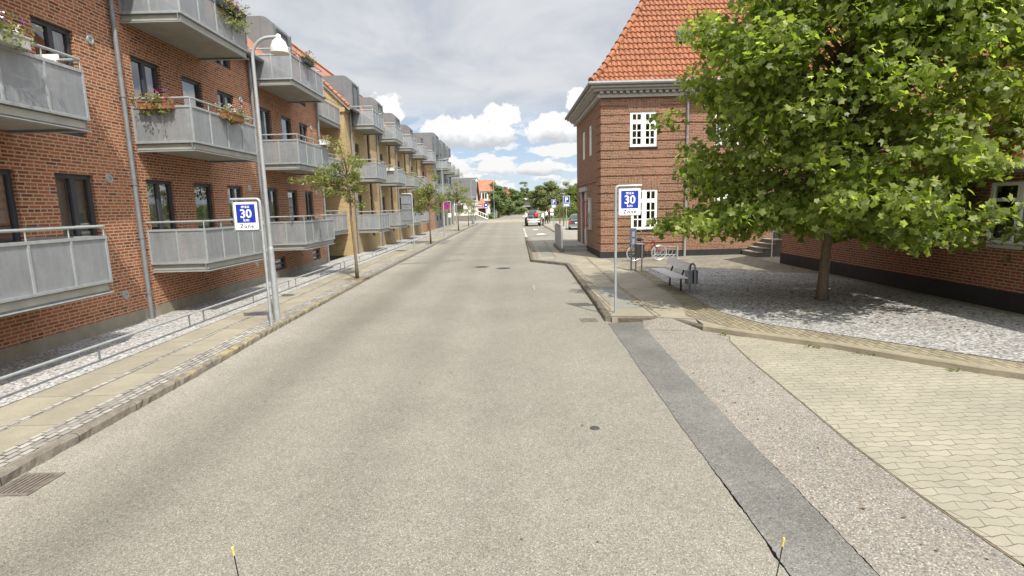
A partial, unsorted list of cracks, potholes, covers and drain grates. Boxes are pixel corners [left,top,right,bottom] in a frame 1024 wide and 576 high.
drain grate [0,472,66,497]
